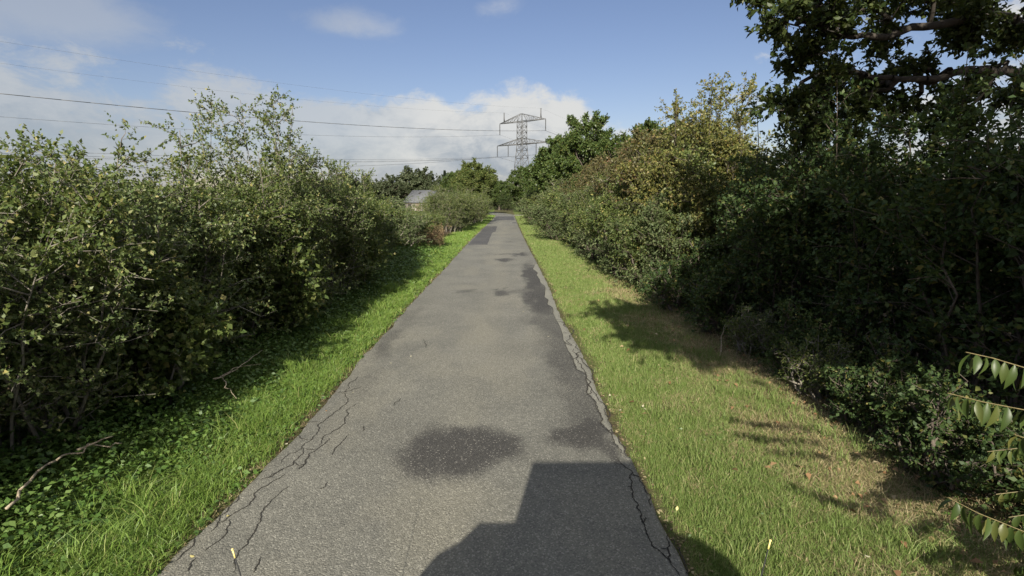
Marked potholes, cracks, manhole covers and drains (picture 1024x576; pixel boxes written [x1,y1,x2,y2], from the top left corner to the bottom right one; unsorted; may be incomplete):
crack [556,319,688,576]
crack [176,378,364,571]
